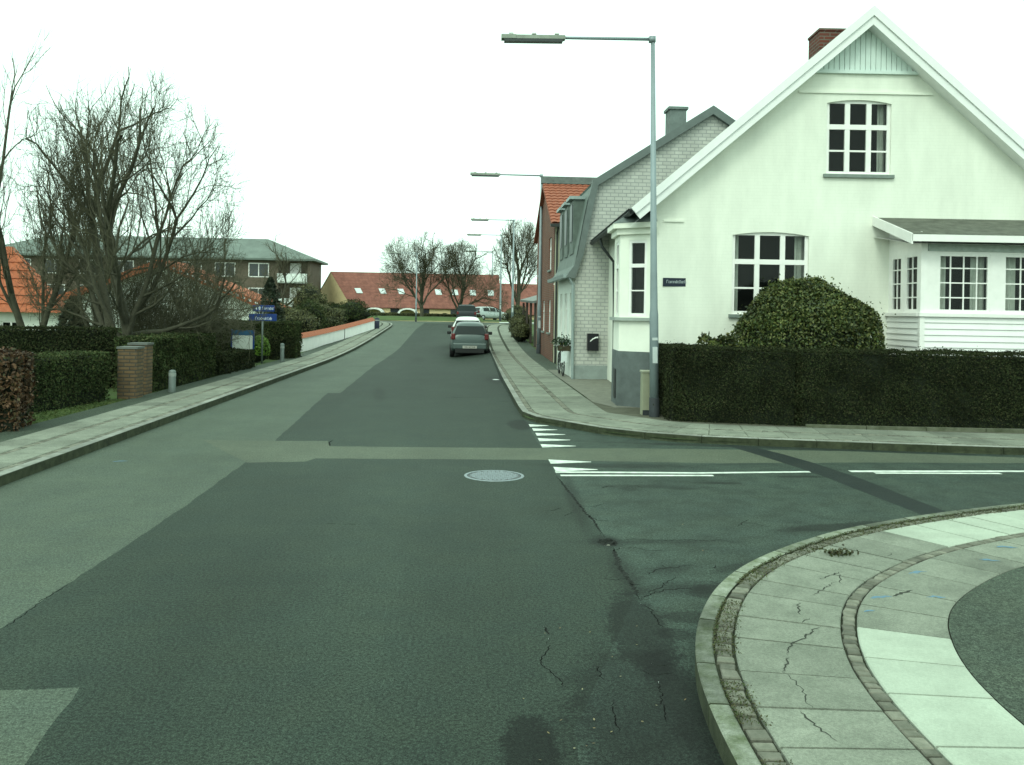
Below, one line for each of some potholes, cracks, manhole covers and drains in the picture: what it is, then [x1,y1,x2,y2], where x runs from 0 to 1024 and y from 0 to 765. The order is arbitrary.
crack [540,627,570,689]
manhole cover [464,470,524,481]
pothole [598,538,618,546]
crack [783,572,842,741]
